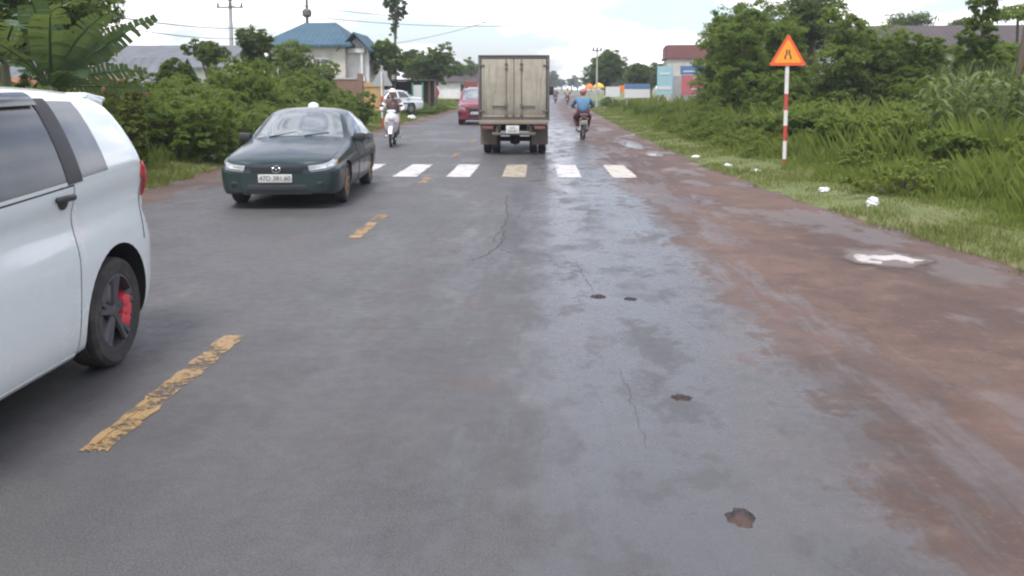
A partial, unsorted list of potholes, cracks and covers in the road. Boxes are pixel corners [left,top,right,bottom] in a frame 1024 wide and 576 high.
pothole [724,507,756,529]
crack [440,195,524,265]
